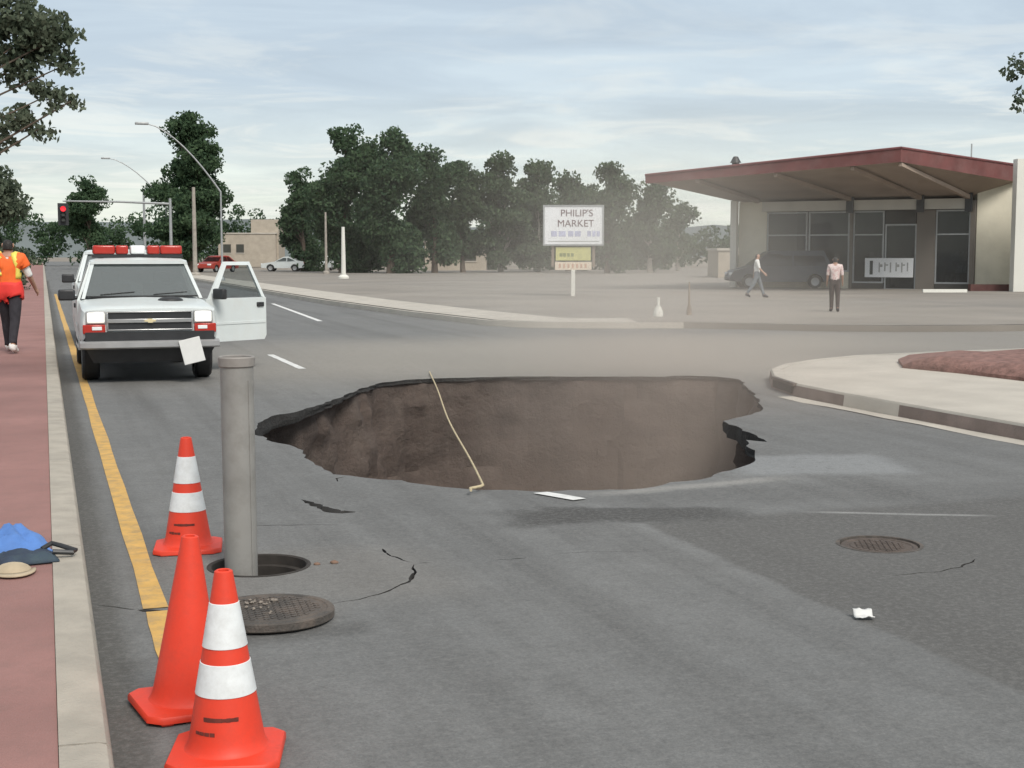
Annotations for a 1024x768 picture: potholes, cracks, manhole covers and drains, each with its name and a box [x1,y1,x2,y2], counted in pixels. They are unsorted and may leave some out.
manhole cover [836,535,924,553]
crack [303,500,353,513]
crack [337,549,417,603]
manhole cover [207,554,311,577]
crack [893,559,975,576]
manhole cover [238,593,335,634]
